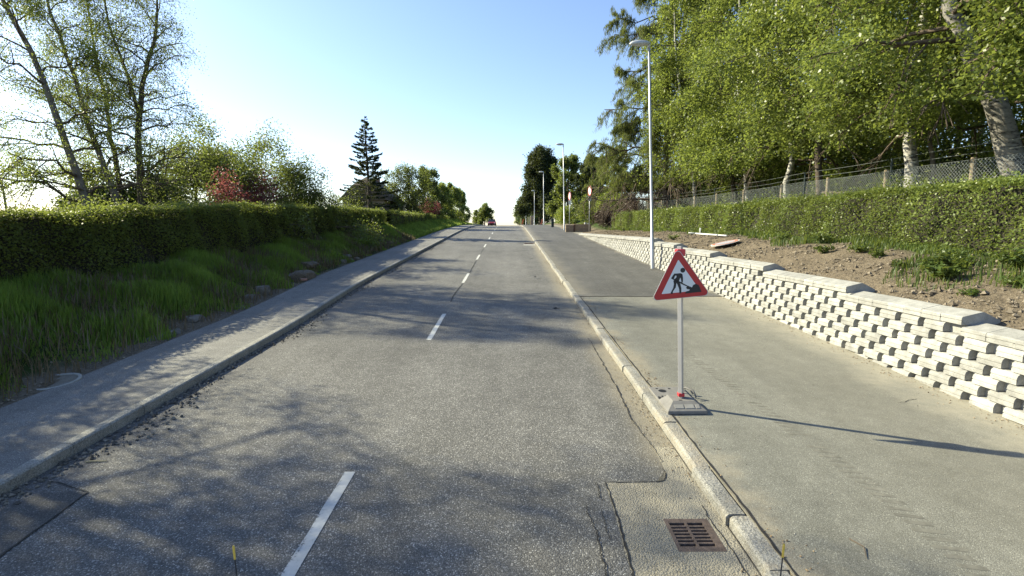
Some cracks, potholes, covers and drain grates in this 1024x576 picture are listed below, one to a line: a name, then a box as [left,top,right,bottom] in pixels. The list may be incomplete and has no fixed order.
crack [581,298,799,576]
drain grate [663,519,727,552]
